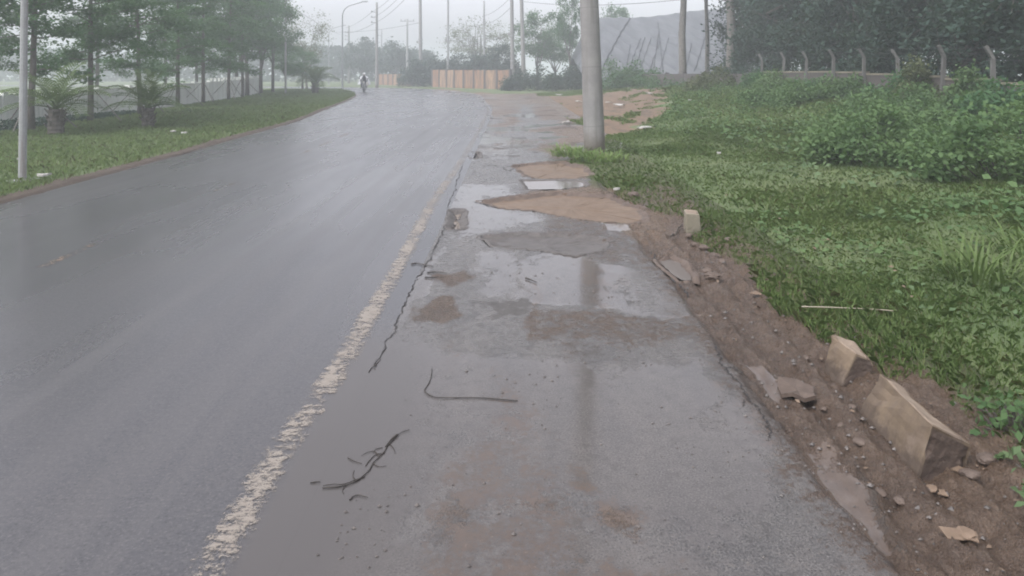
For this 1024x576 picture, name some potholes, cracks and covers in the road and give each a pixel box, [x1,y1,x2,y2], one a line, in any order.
pothole [443,209,469,230]
crack [374,165,463,369]
pothole [518,179,591,191]
